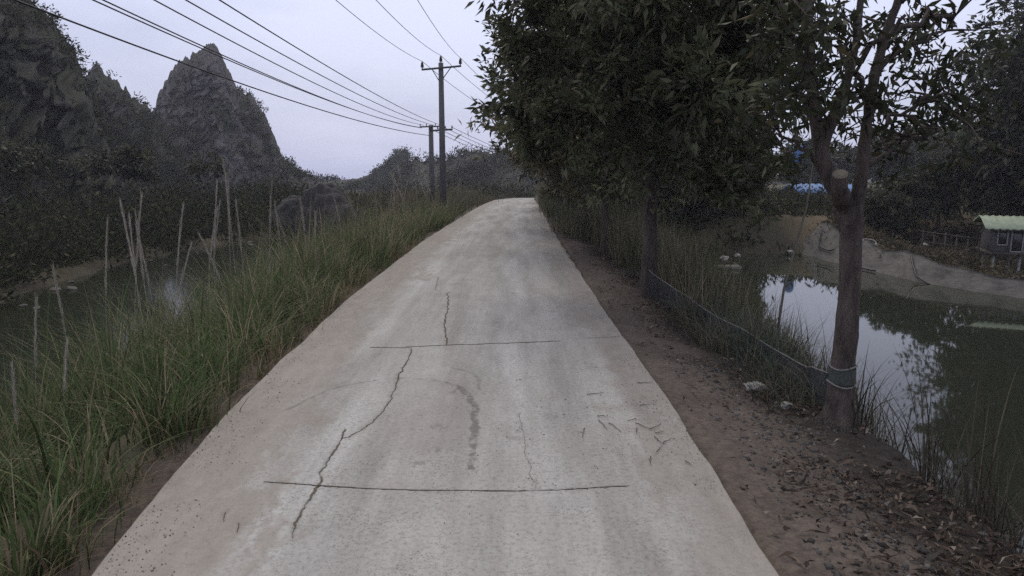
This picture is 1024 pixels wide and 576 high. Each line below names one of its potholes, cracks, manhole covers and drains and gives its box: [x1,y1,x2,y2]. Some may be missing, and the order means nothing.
crack [264,277,629,538]
